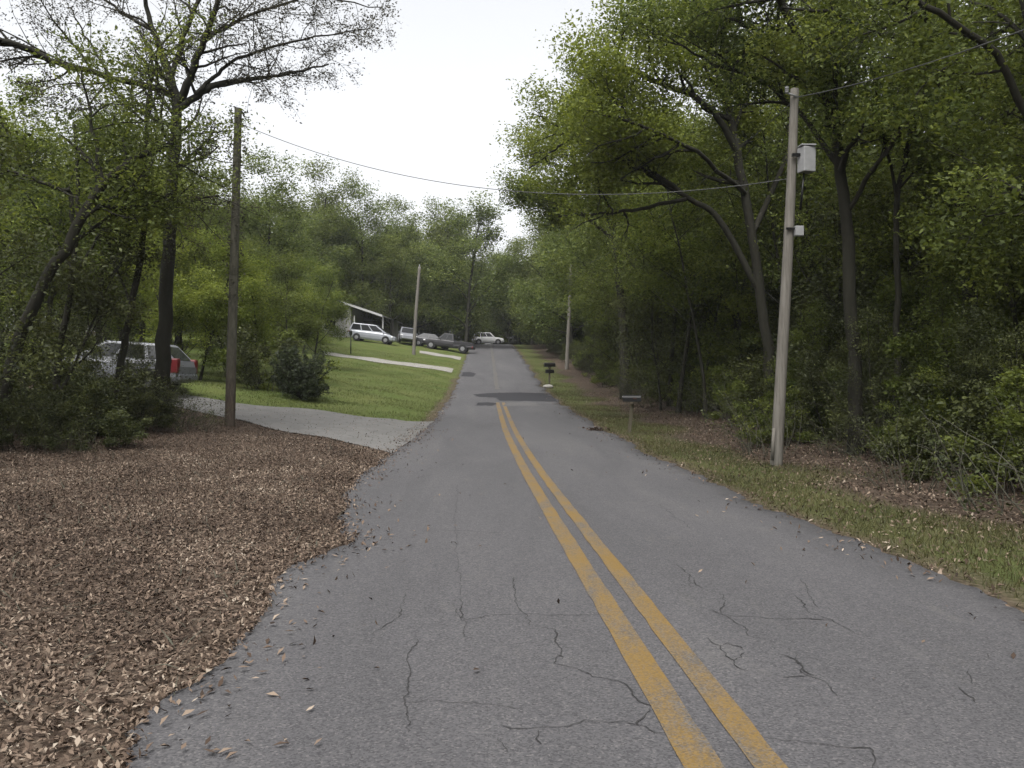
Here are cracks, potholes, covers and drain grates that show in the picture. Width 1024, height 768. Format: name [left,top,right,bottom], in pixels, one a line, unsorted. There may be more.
crack [785,653,837,695]
crack [403,639,514,732]
crack [431,490,707,752]
crack [764,737,876,768]
crack [710,579,854,671]
